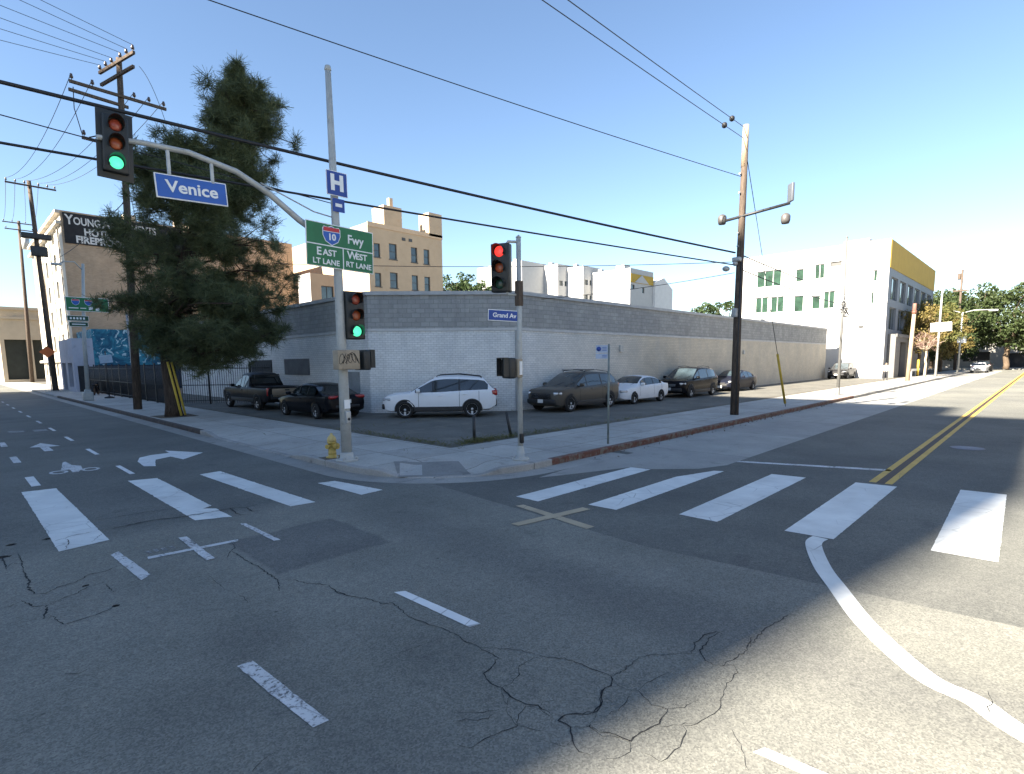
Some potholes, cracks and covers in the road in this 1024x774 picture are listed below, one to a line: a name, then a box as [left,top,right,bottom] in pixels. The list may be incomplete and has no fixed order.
crack [0,556,114,625]
crack [213,543,481,655]
crack [457,615,788,762]
